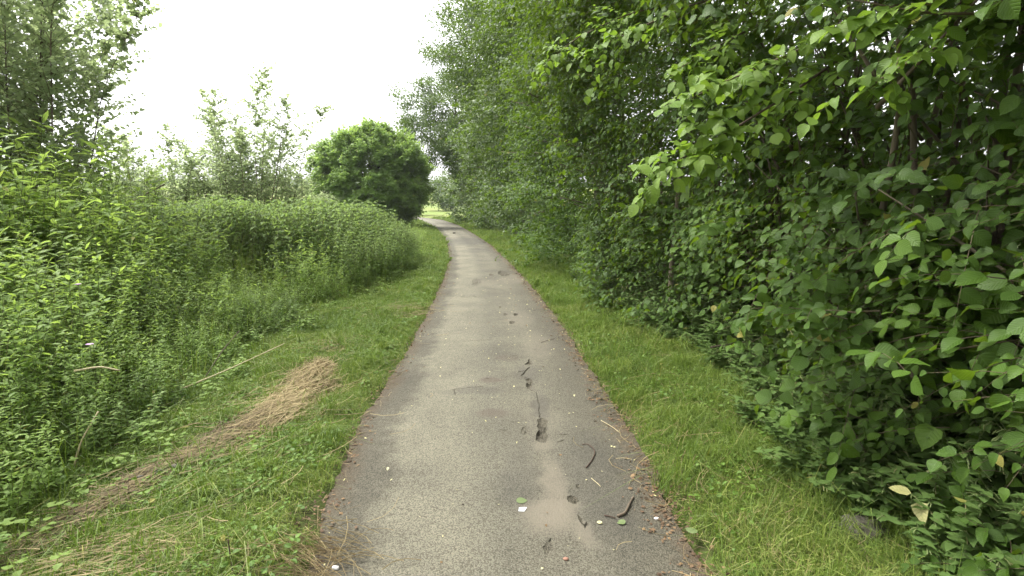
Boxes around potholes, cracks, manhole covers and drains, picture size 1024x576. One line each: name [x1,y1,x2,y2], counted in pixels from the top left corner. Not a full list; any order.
pothole [536,417,548,443]
pothole [543,538,554,555]
crack [514,355,541,418]
